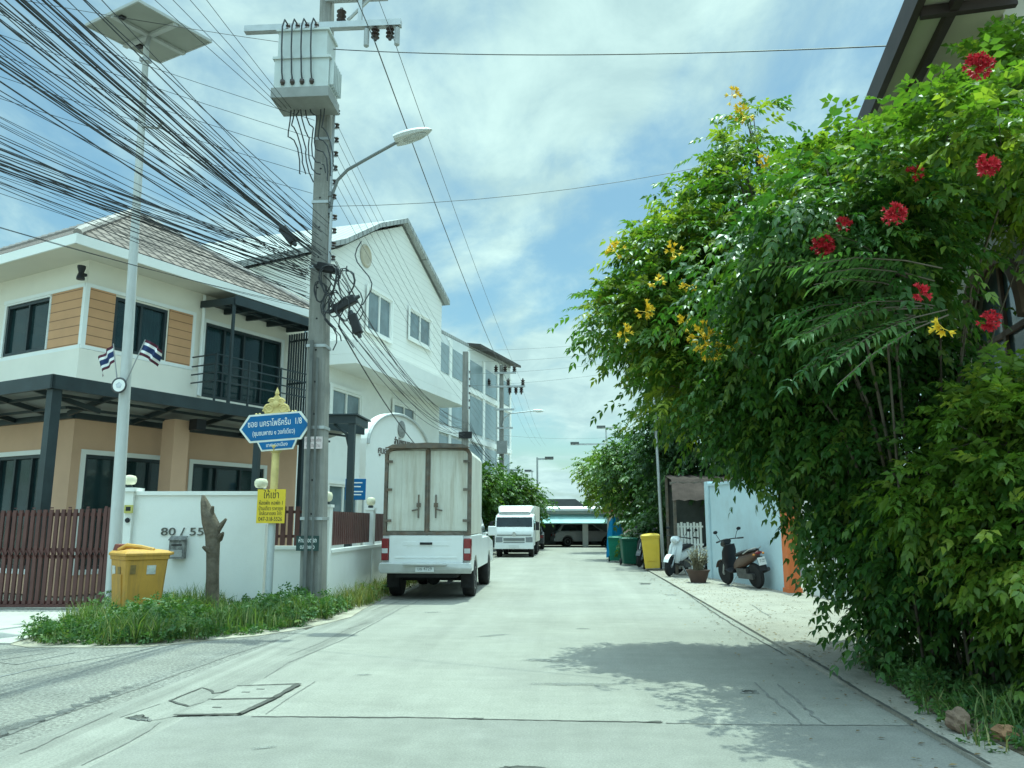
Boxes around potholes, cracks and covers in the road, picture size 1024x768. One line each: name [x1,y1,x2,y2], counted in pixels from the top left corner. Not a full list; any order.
manhole cover [174,697,275,716]
manhole cover [211,683,302,700]
